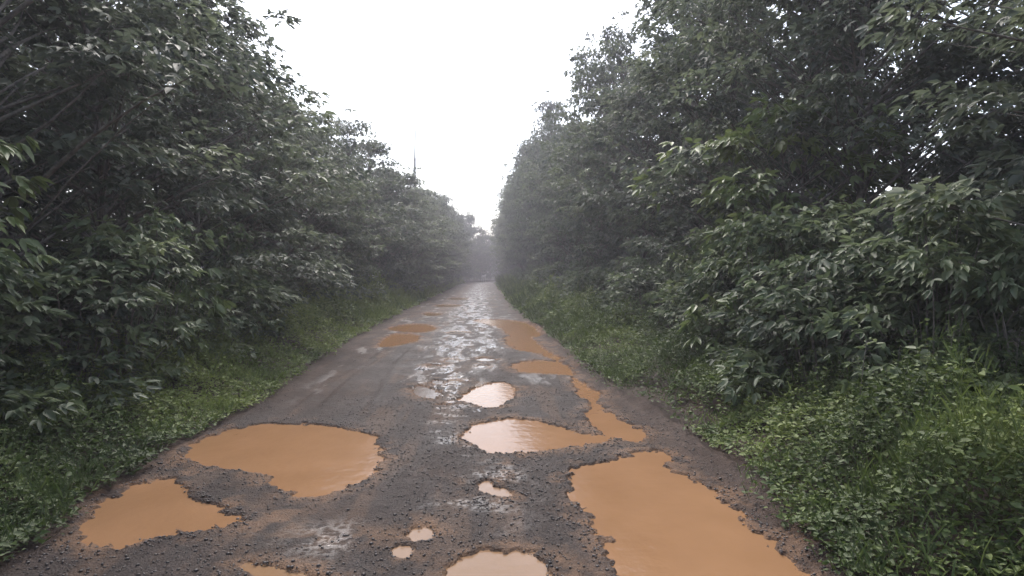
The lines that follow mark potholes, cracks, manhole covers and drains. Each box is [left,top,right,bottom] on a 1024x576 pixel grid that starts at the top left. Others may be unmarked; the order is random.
pothole [171,421,392,498]
pothole [439,543,567,576]
pothole [386,323,439,333]
pothole [472,319,545,338]
pothole [405,384,444,399]
pothole [231,557,330,576]
pothole [396,521,445,543]
pothole [375,333,424,347]
pothole [457,416,616,456]
pothole [558,447,822,576]
pothole [471,477,519,498]
pothole [71,475,251,550]
